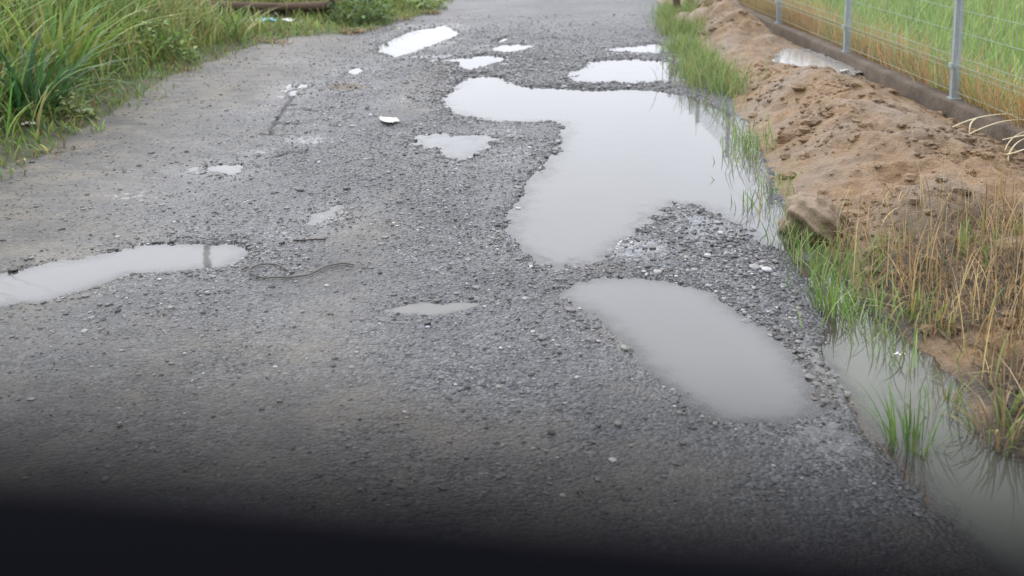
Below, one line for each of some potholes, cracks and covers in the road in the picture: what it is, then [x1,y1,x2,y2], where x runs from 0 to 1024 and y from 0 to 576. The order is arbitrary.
pothole [396,52,511,70]
pothole [434,72,815,273]
pothole [0,237,259,311]
crack [256,97,323,158]
pothole [375,296,493,321]
pothole [549,271,854,431]
